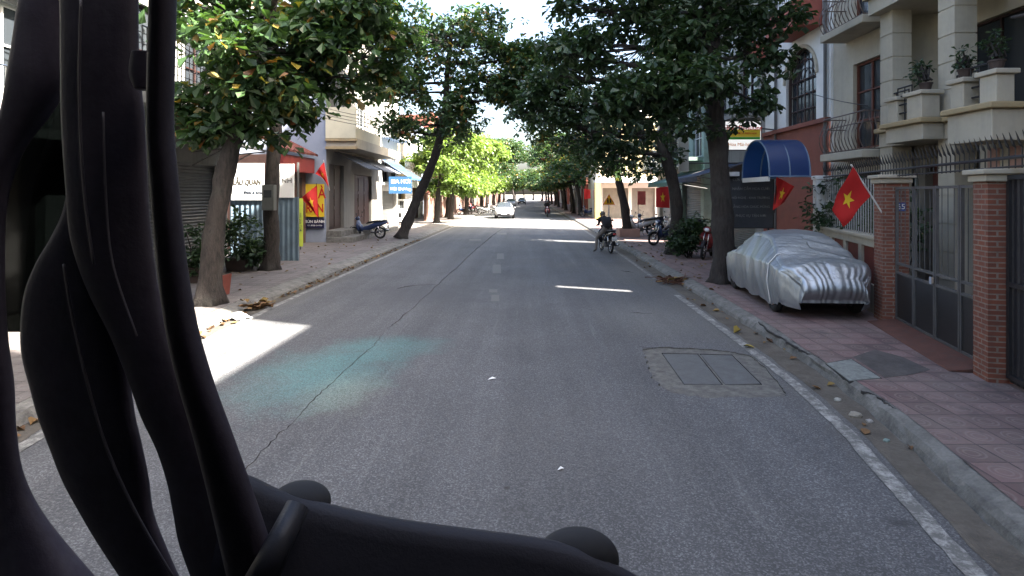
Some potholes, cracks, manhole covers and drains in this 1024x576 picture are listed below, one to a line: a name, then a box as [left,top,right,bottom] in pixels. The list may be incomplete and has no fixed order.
crack [758,321,819,358]
crack [246,233,496,468]
manhole cover [643,347,786,398]
